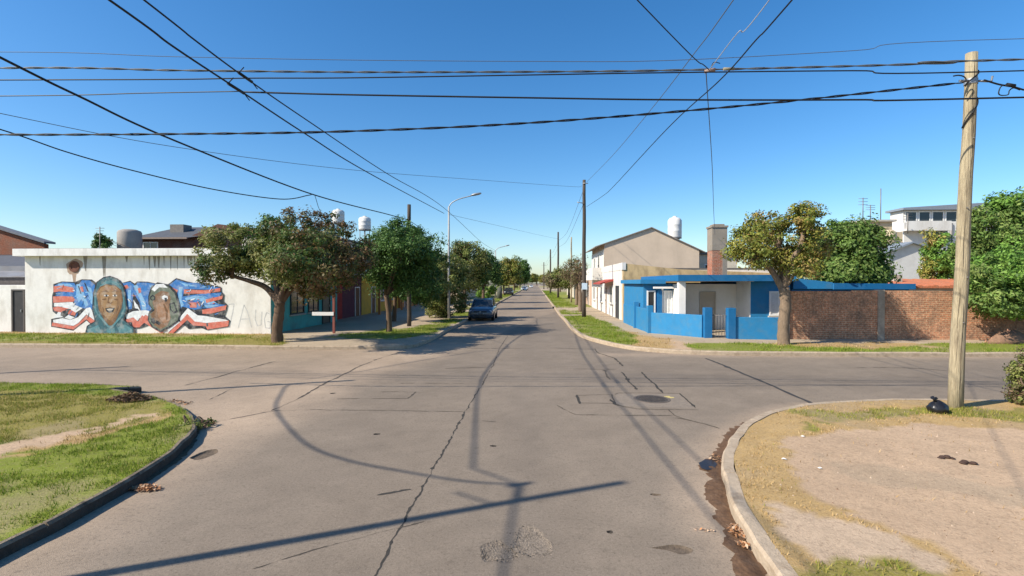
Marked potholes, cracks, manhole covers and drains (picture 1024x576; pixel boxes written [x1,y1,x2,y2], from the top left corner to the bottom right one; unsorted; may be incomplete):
manhole cover [634,395,671,403]
pothole [190,449,218,460]
crack [253,339,506,576]
